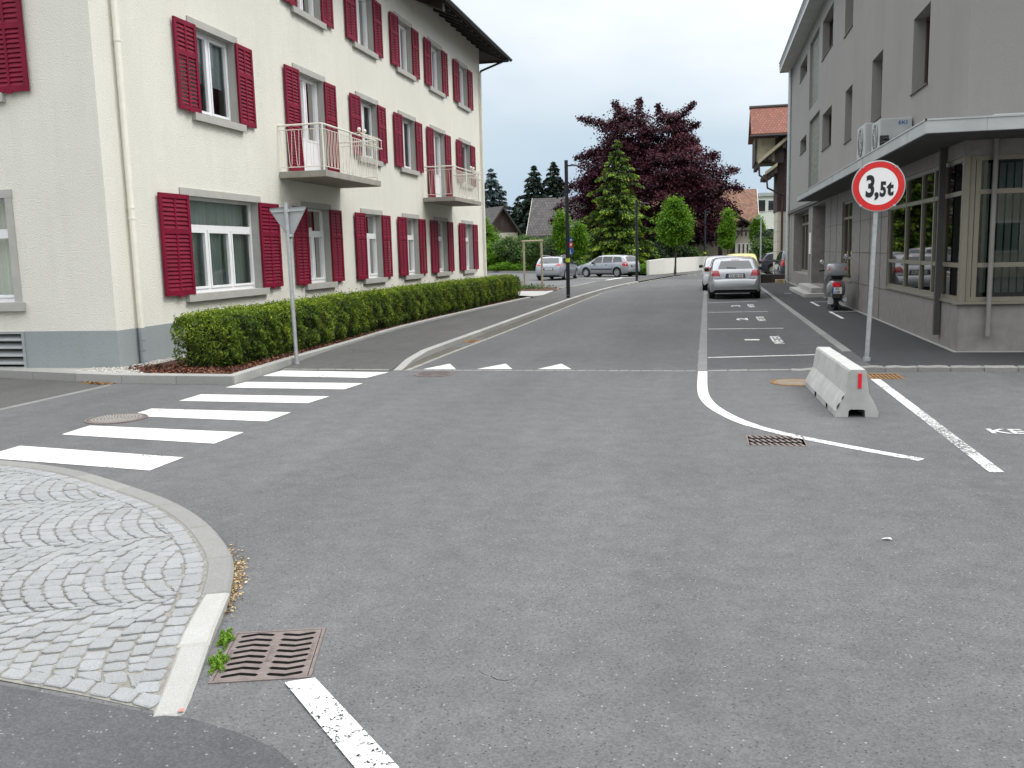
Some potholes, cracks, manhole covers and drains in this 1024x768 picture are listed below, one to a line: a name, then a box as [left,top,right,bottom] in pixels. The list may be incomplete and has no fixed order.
drain grate [208,627,326,684]
drain grate [746,435,808,447]
manhole cover [84,413,148,425]
